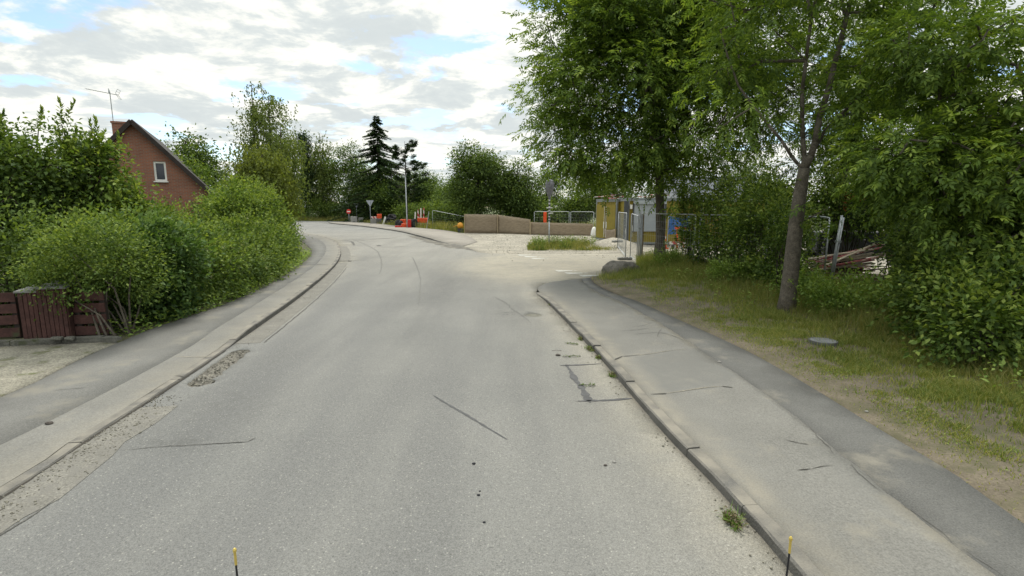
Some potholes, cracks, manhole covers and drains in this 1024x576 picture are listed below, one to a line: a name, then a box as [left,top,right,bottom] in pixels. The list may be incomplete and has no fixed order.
crack [788,425,1004,576]
pothole [187,350,251,387]
crack [0,350,254,500]
manhole cover [808,337,838,347]
